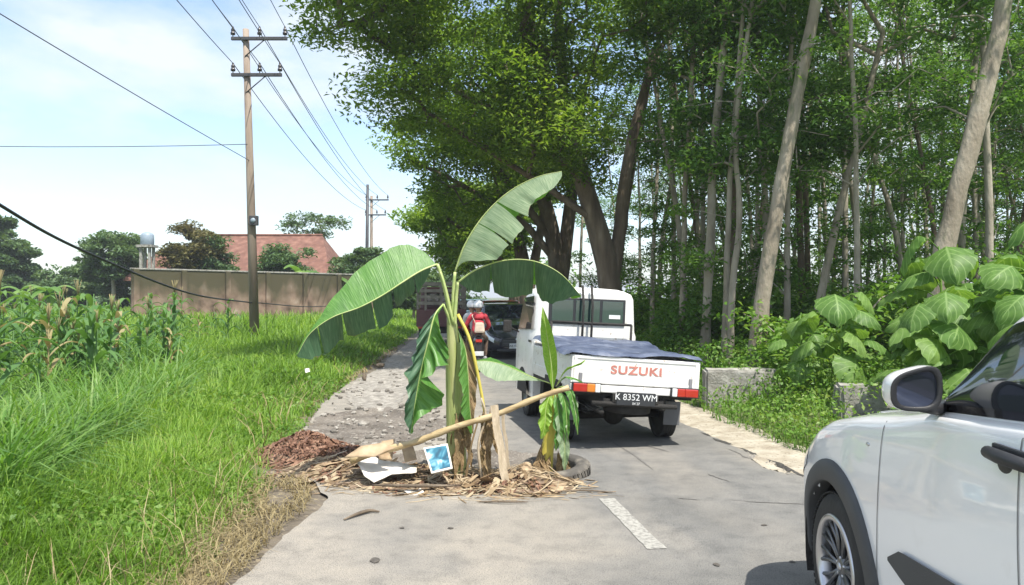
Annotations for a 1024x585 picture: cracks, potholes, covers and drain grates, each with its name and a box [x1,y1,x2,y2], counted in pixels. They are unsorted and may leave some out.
crack [701,432,804,477]
pothole [383,449,556,494]
